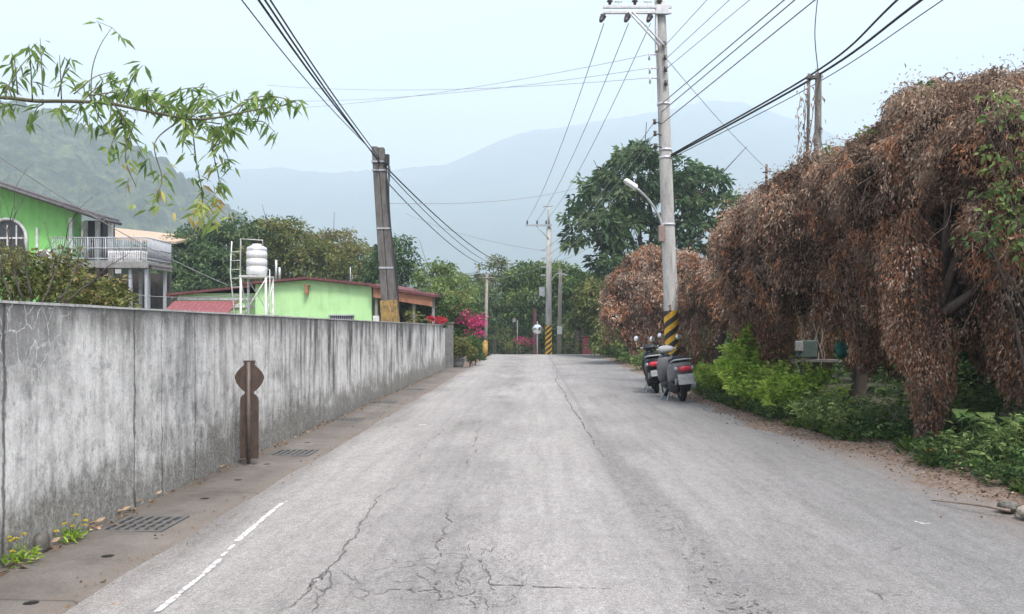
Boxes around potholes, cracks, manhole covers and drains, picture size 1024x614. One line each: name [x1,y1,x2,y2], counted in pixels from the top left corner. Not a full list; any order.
drain grate [96,515,190,532]
crack [274,419,584,612]
